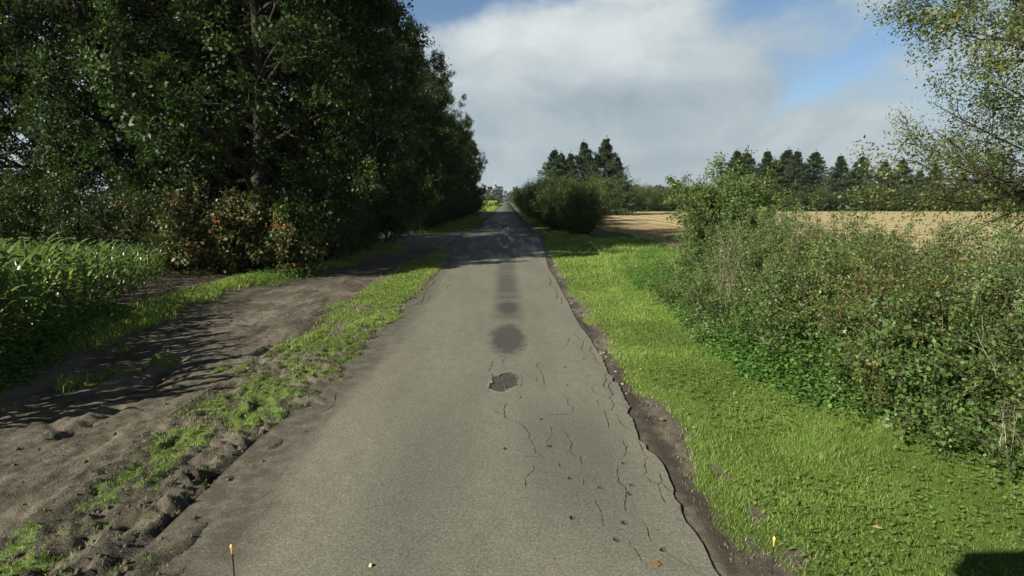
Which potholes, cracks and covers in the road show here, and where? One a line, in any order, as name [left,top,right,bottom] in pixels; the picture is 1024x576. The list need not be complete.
crack [485,359,603,523]
pothole [489,372,519,392]
crack [567,331,700,574]
